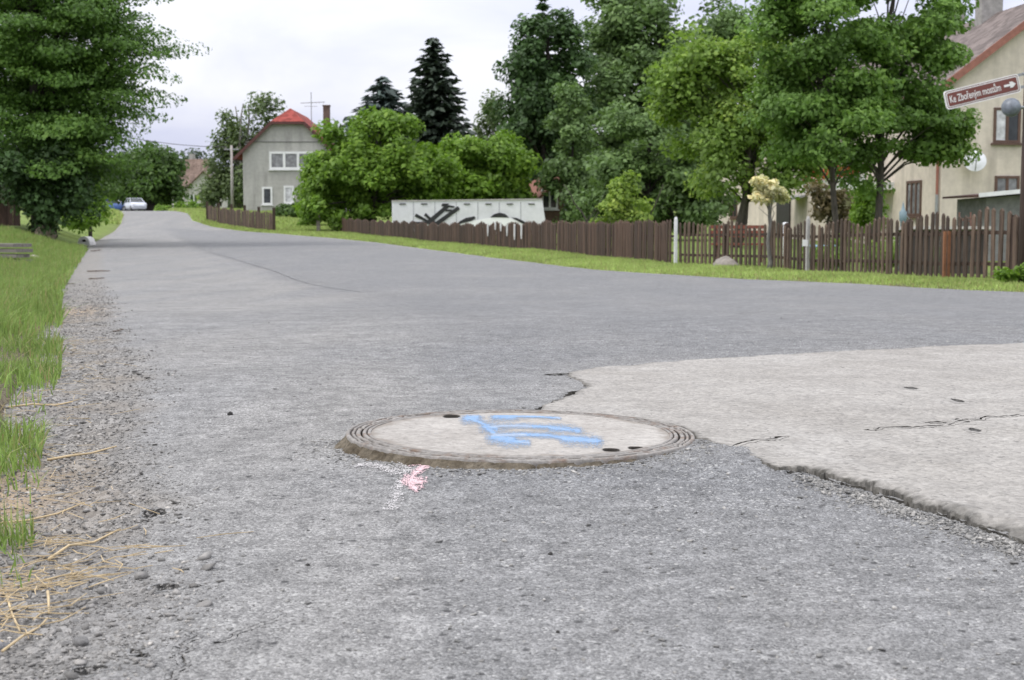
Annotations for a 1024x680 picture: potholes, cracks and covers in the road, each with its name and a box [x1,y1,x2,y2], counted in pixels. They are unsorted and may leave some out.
crack [534,373,584,410]
manhole cover [334,409,701,470]
crack [867,414,1024,431]
crack [728,436,787,447]
